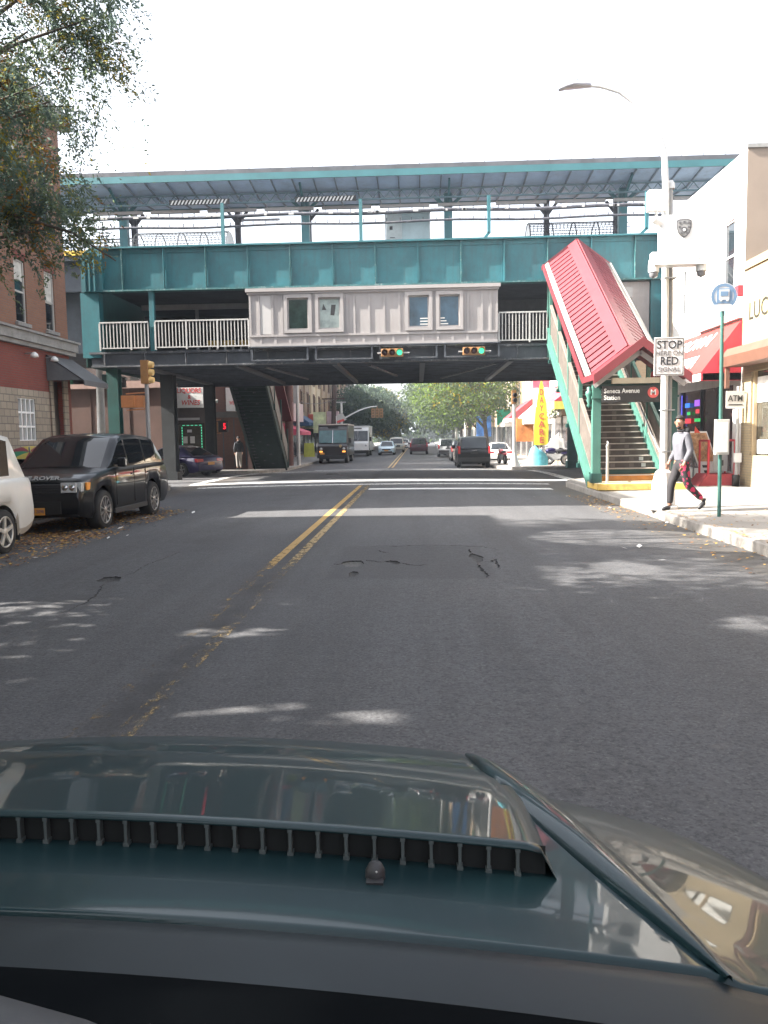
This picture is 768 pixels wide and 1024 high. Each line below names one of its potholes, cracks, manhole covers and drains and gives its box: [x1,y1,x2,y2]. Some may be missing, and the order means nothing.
crack [69,550,184,611]
crack [337,545,501,577]
